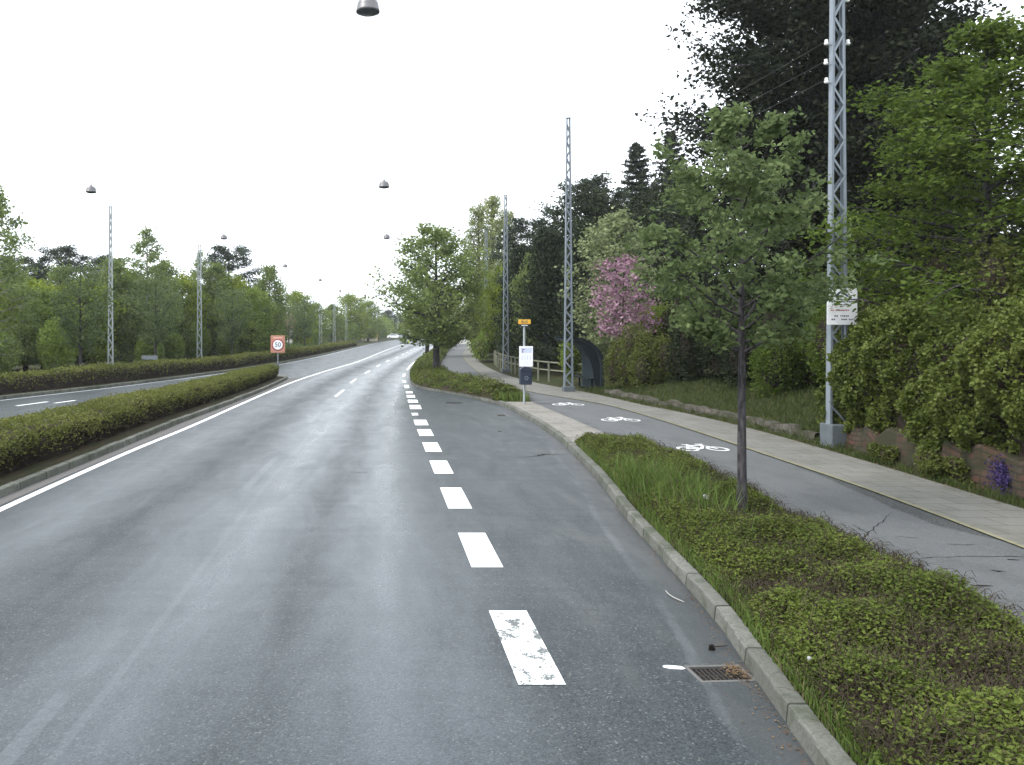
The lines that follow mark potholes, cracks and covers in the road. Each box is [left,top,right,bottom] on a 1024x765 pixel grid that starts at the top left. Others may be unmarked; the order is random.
crack [853,512,1019,586]
drain grate [683,664,757,683]
